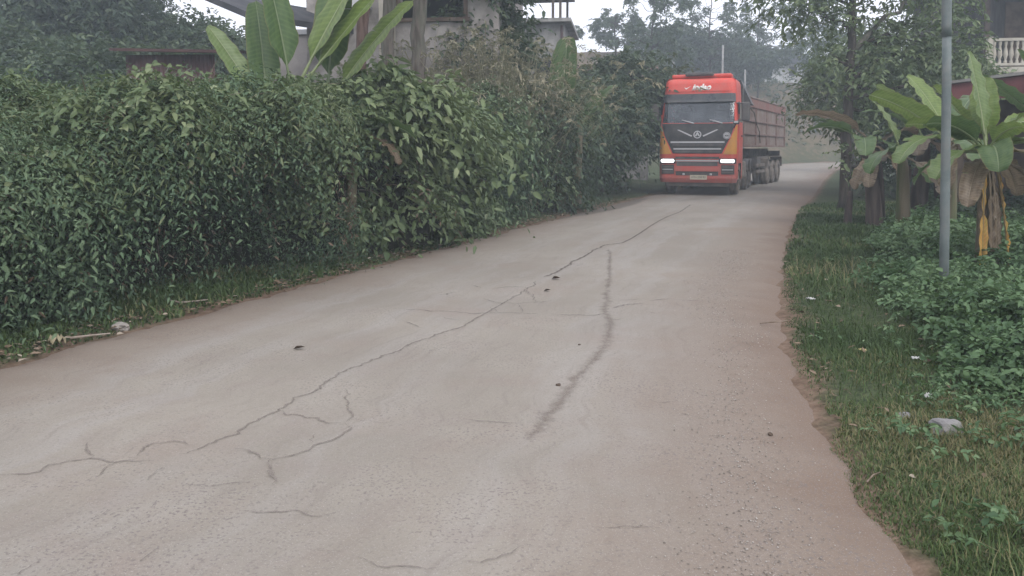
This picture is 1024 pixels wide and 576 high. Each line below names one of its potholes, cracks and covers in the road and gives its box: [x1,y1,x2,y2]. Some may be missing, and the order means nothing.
crack [14,205,690,517]
